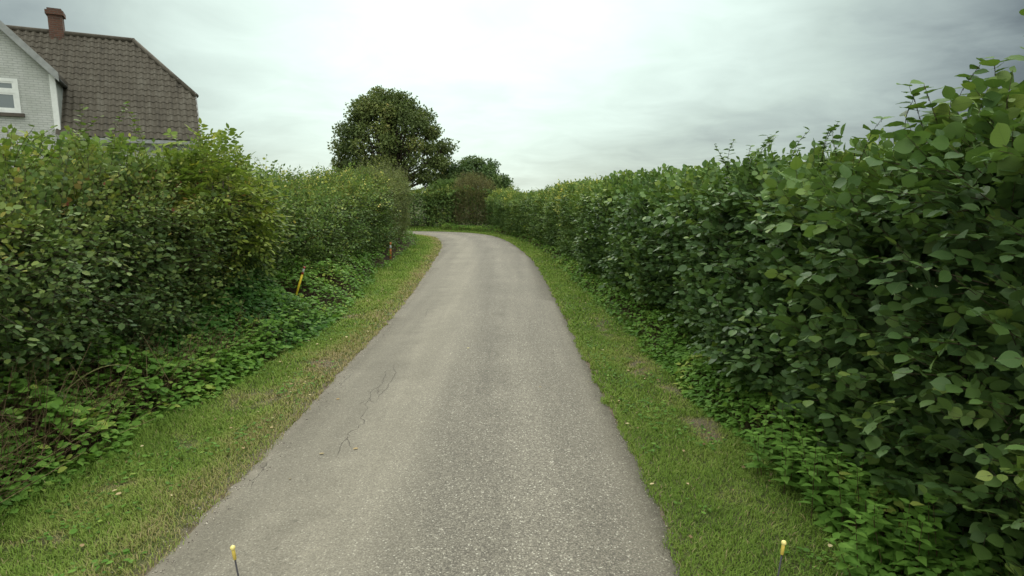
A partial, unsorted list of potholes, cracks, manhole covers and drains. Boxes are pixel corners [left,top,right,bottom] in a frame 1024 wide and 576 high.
crack [336,367,397,458]
